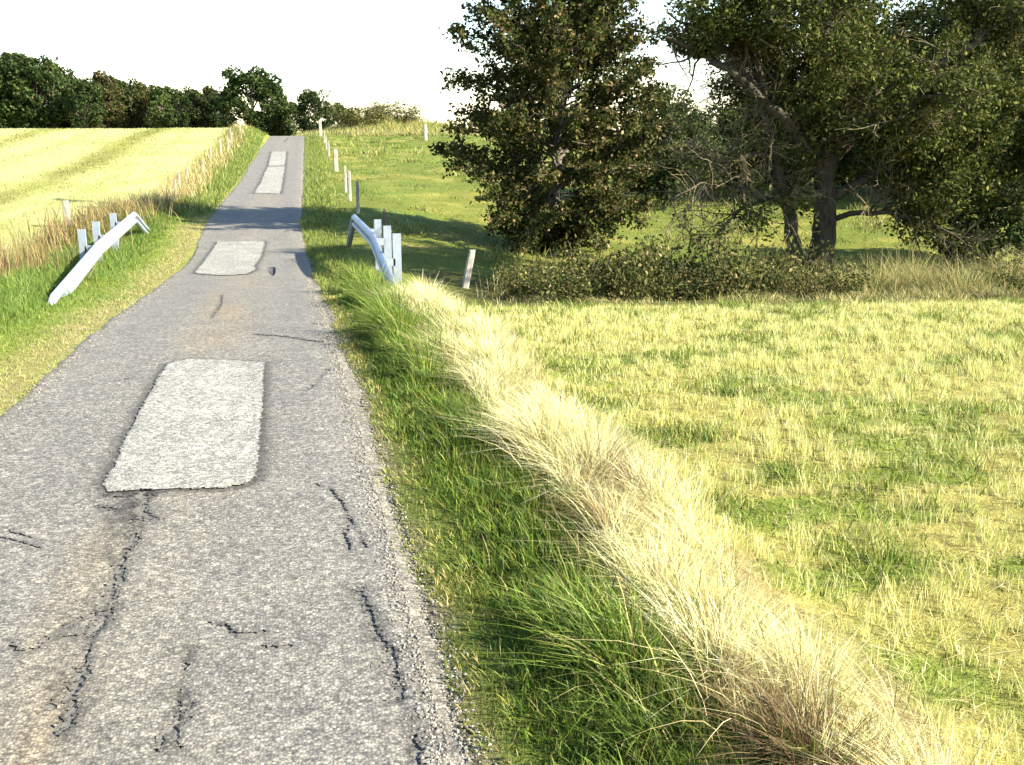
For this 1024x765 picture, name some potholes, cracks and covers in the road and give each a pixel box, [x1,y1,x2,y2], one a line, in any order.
crack [150,654,195,754]
crack [315,483,368,550]
crack [252,323,333,343]
crack [208,621,293,649]
crack [349,586,428,765]
crack [0,529,40,548]
crack [7,489,165,737]
